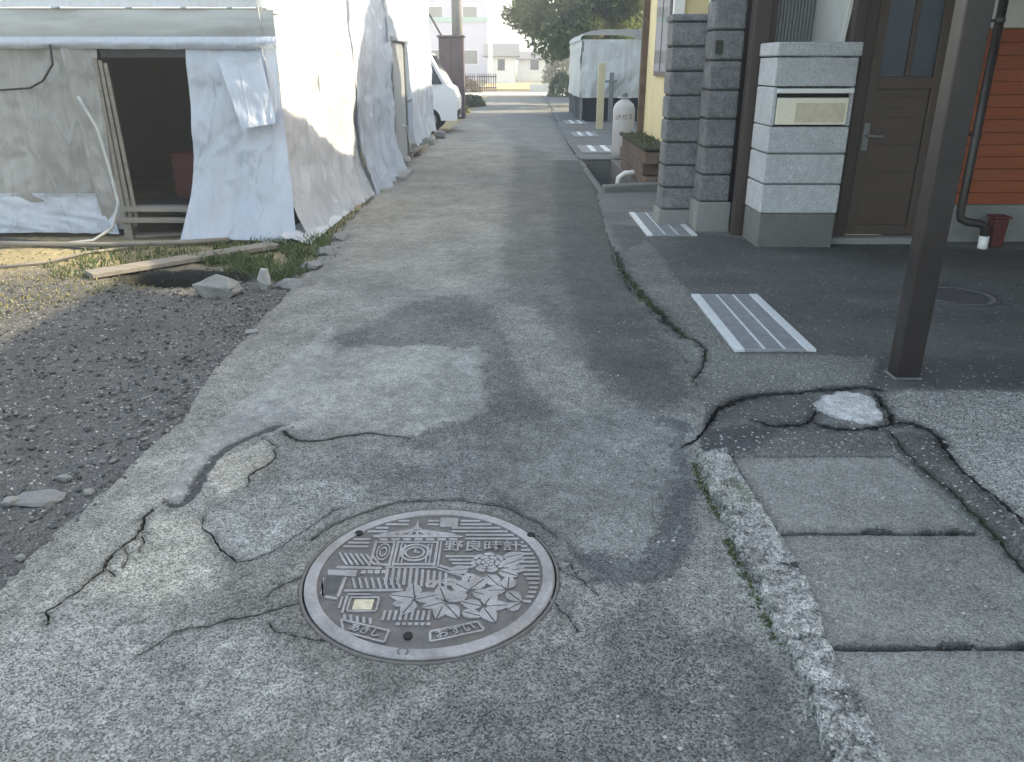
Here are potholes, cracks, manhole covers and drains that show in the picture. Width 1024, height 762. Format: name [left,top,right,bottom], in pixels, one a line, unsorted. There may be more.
crack [41,499,559,657]
manhole cover [298,508,560,665]
manhole cover [935,285,1002,308]
crack [246,430,409,487]
crack [613,251,1024,574]
crack [550,560,599,632]
